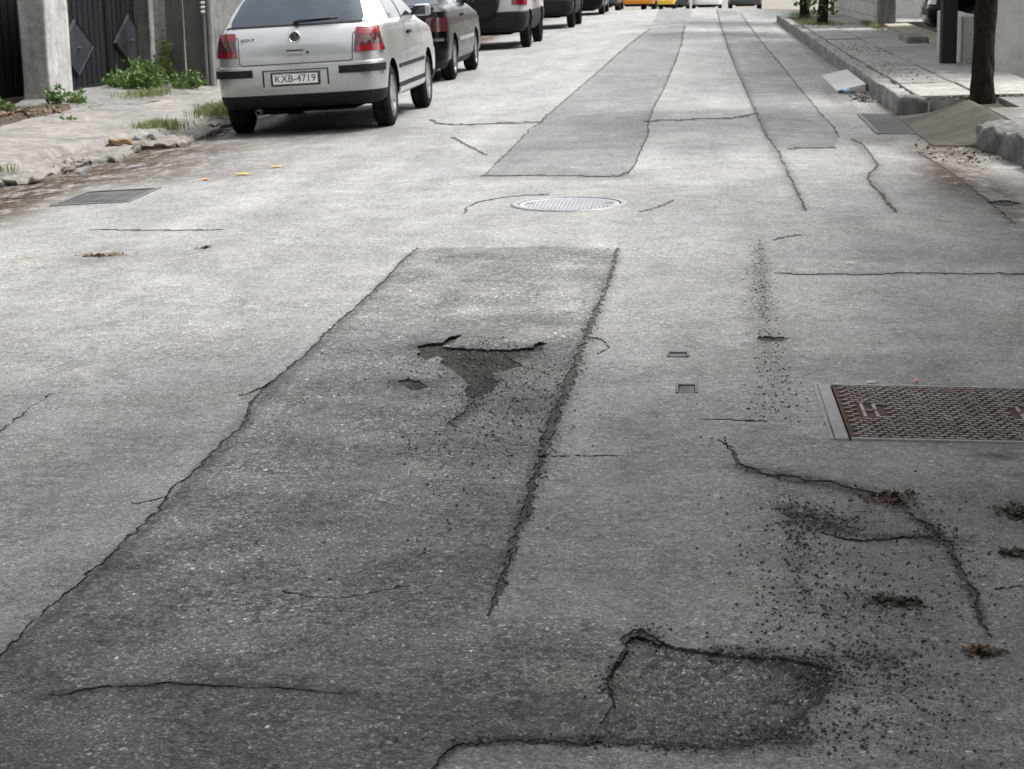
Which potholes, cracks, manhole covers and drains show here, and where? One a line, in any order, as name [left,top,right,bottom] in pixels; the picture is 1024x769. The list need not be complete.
crack [48,681,344,696]
pothole [417,334,547,398]
manhole cover [511,196,628,212]
crack [699,418,1024,638]
crack [788,139,897,212]
pothole [588,636,832,751]
pothole [397,378,428,390]
crack [429,26,758,177]
utility cover [675,383,698,393]
crack [0,248,418,657]
crack [591,337,610,354]
